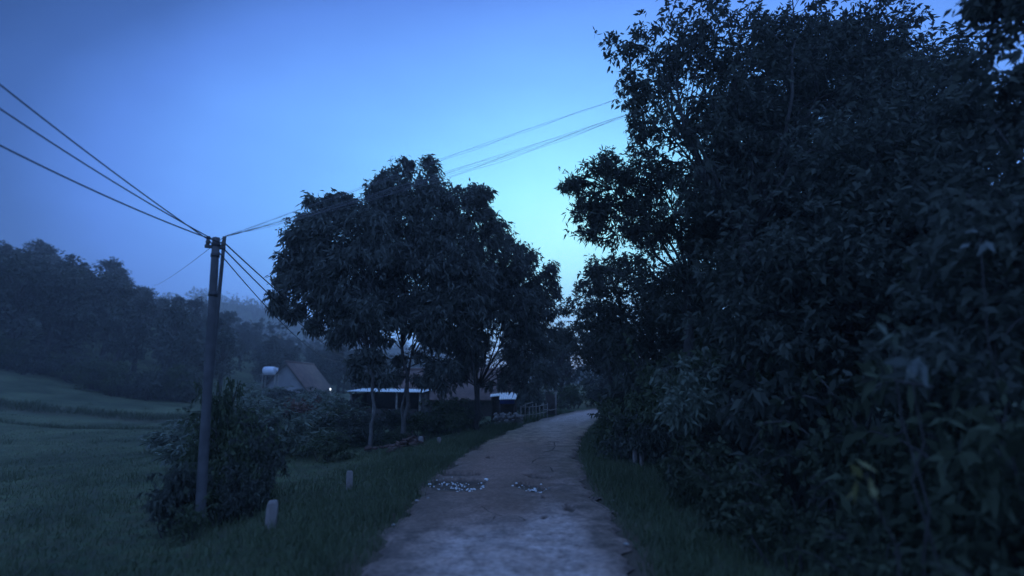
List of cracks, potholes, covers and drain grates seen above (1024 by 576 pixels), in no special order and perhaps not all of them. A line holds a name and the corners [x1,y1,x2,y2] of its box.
pothole [426,477,491,493]
pothole [512,481,551,494]
crack [522,441,565,472]
